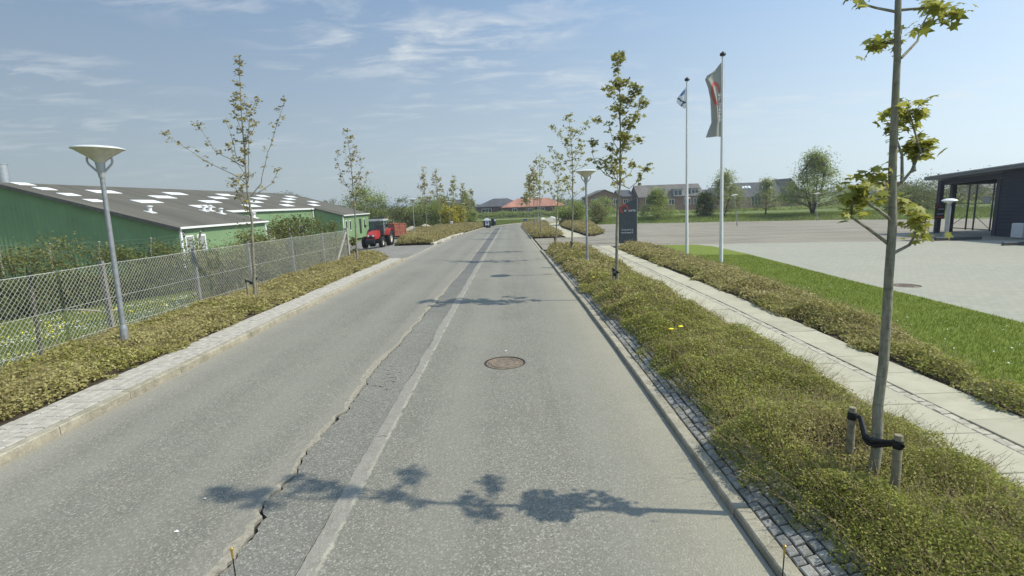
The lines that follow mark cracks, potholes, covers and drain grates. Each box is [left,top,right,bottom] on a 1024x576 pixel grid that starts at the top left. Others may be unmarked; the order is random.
crack [294,510,333,576]
crack [335,301,450,422]
crack [219,506,267,576]
manhole cover [484,356,526,369]
